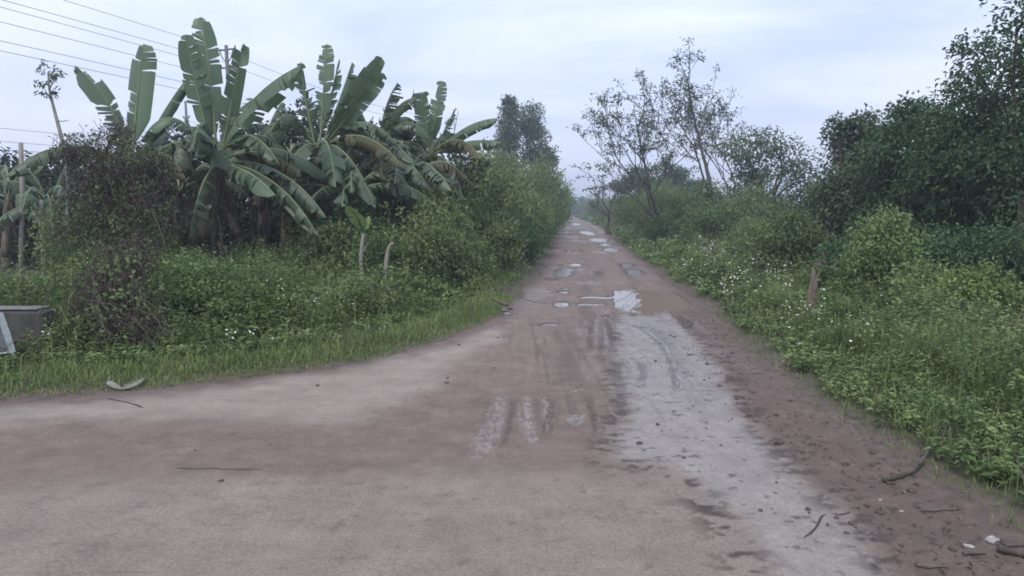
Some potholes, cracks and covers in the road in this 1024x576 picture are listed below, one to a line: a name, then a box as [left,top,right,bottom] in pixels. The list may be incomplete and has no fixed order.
pothole [620,268,648,277]
pothole [551,267,580,279]
pothole [611,289,692,313]
